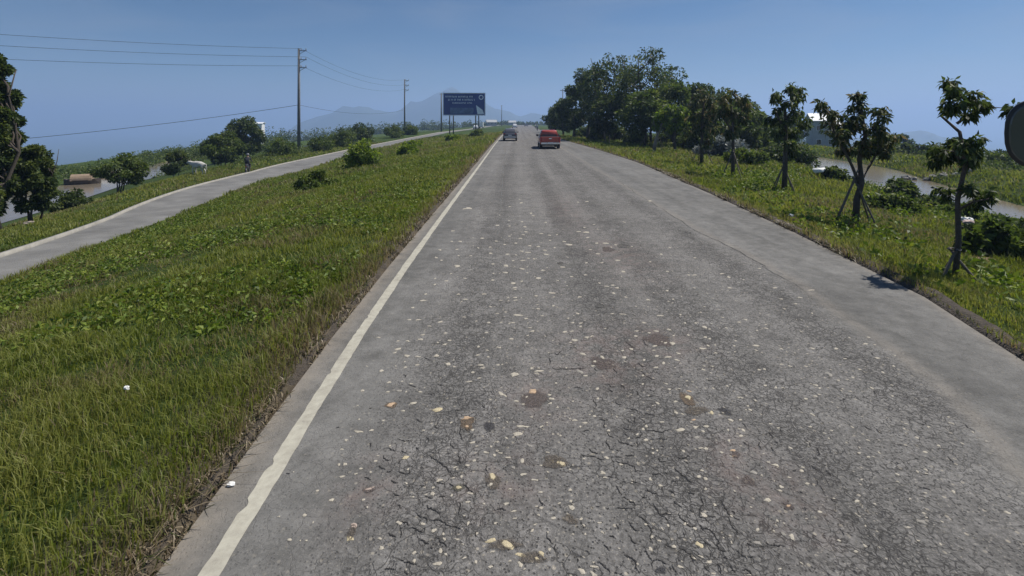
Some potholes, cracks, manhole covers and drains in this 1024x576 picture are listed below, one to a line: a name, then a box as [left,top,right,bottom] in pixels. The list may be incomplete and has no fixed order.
pothole [644,334,670,346]
pothole [592,357,616,369]
pothole [521,390,547,407]
pothole [543,455,568,468]
pothole [520,551,547,563]
crack [364,374,488,575]
crack [549,339,784,575]
